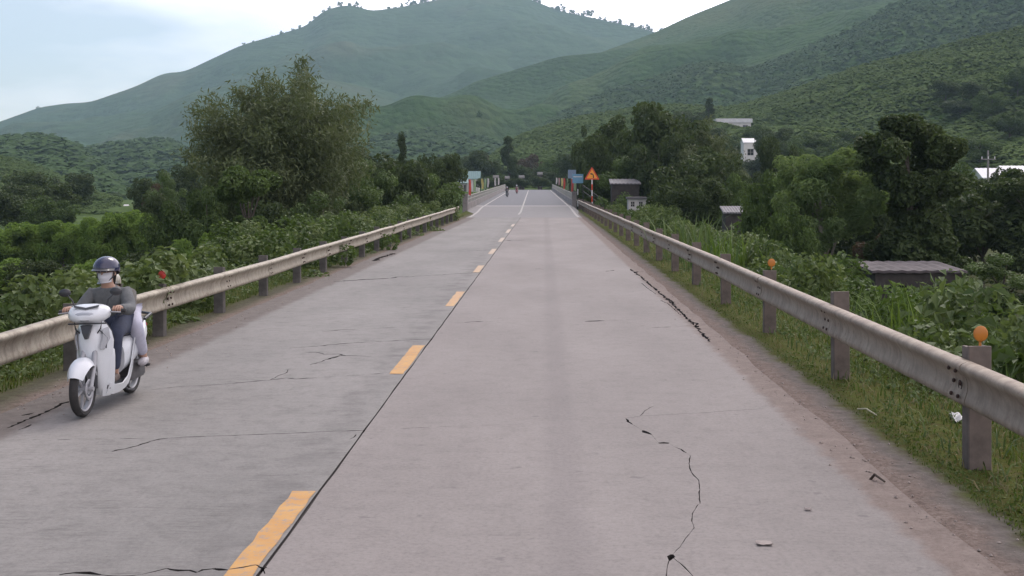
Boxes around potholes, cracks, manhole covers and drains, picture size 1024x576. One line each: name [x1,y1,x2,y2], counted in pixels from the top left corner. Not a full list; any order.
crack [612,269,710,342]
crack [625,407,750,576]
crack [170,329,432,388]
crack [65,430,363,452]
crack [59,565,267,576]
